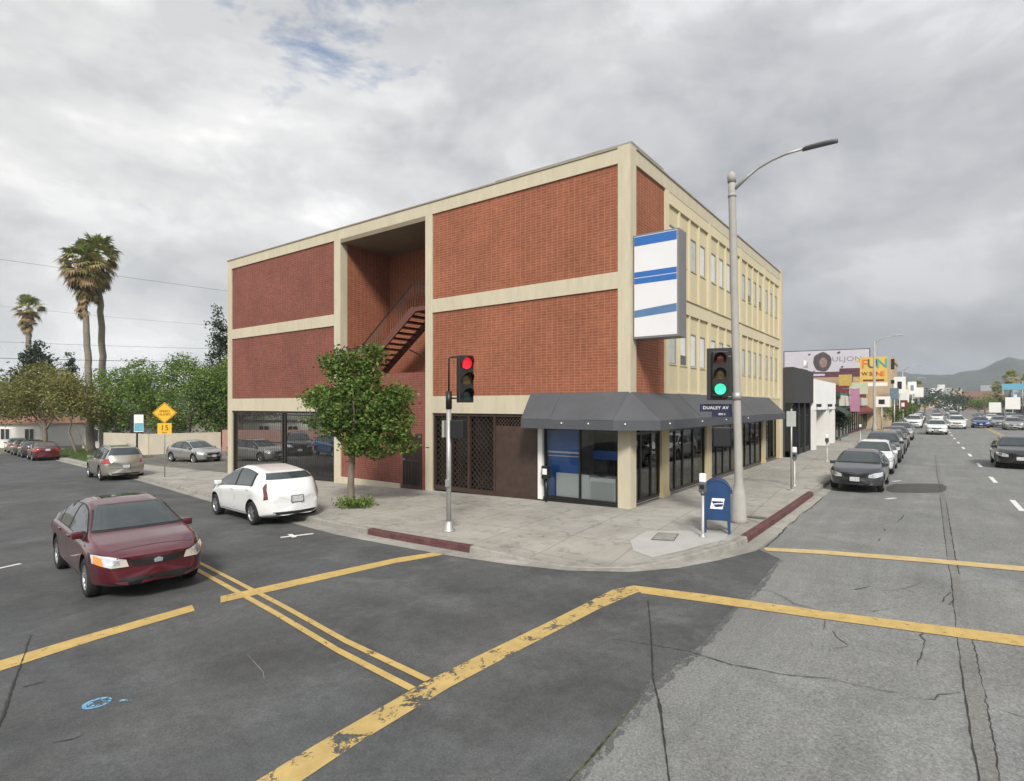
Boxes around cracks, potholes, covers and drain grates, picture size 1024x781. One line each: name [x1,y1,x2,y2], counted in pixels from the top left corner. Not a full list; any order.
utility cover [651,532,678,541]
crack [914,632,926,667]
crack [934,459,1022,781]
crack [612,638,900,693]
